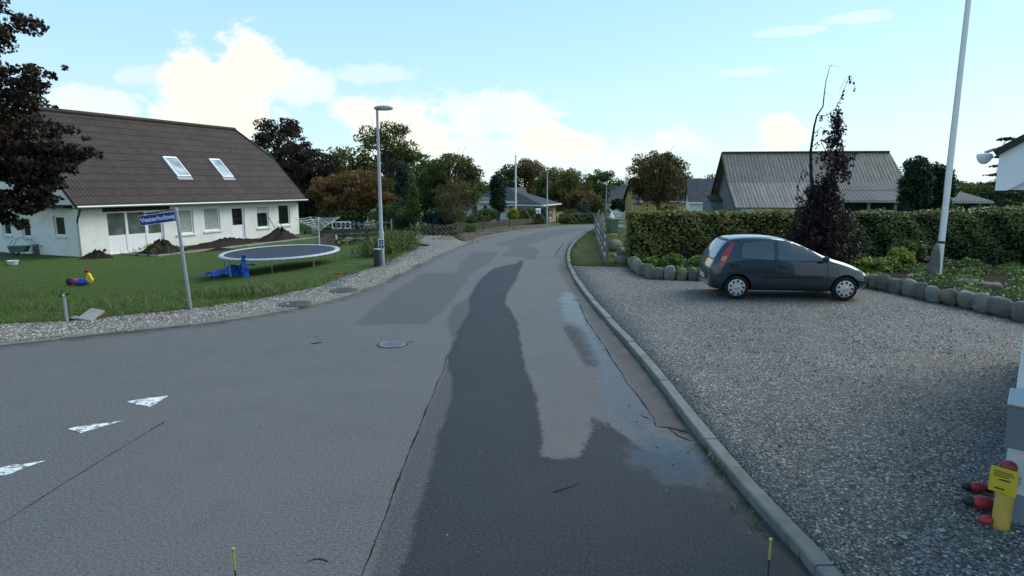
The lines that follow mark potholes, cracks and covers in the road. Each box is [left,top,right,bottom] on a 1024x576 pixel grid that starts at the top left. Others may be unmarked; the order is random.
crack [577,299,691,441]
manhole cover [377,340,408,348]
crack [361,356,447,576]
manhole cover [278,301,311,309]
